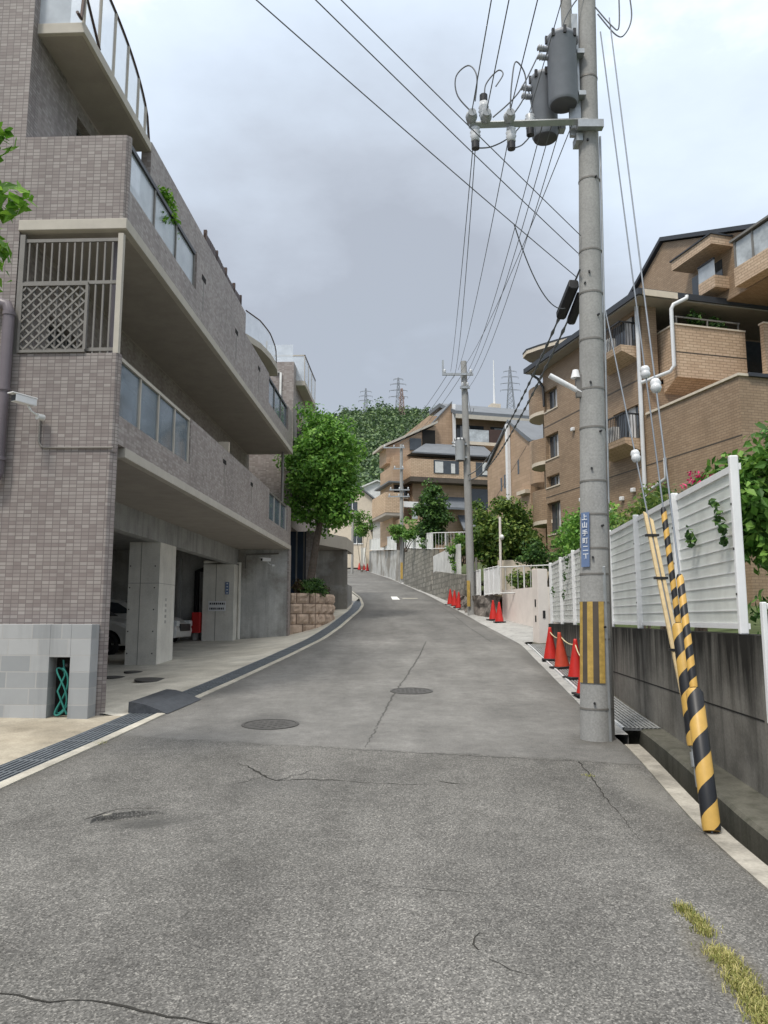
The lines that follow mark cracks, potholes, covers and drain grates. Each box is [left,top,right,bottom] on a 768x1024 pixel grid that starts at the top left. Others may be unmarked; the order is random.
crack [0,993,215,1024]
manhole cover [241,719,299,730]
crack [578,761,638,837]
crack [365,641,426,747]
crack [210,764,431,788]
